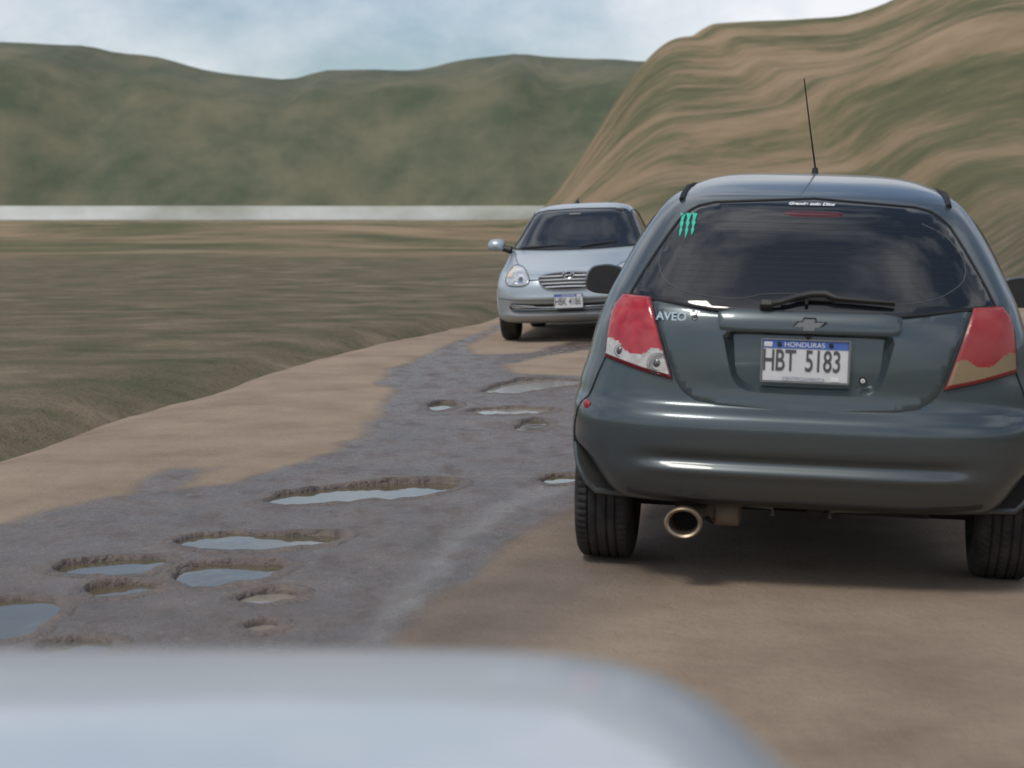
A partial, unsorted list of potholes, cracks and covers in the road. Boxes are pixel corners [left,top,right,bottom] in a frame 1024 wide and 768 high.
pothole [505,417,559,433]
pothole [472,376,580,395]
pothole [527,471,575,486]
pothole [418,399,468,412]
pothole [458,405,563,416]
pothole [152,555,306,591]
pothole [67,577,187,602]
pothole [251,476,475,507]
pothole [219,583,316,607]
pothole [225,616,297,636]
pothole [0,592,82,645]
pothole [158,529,360,554]
